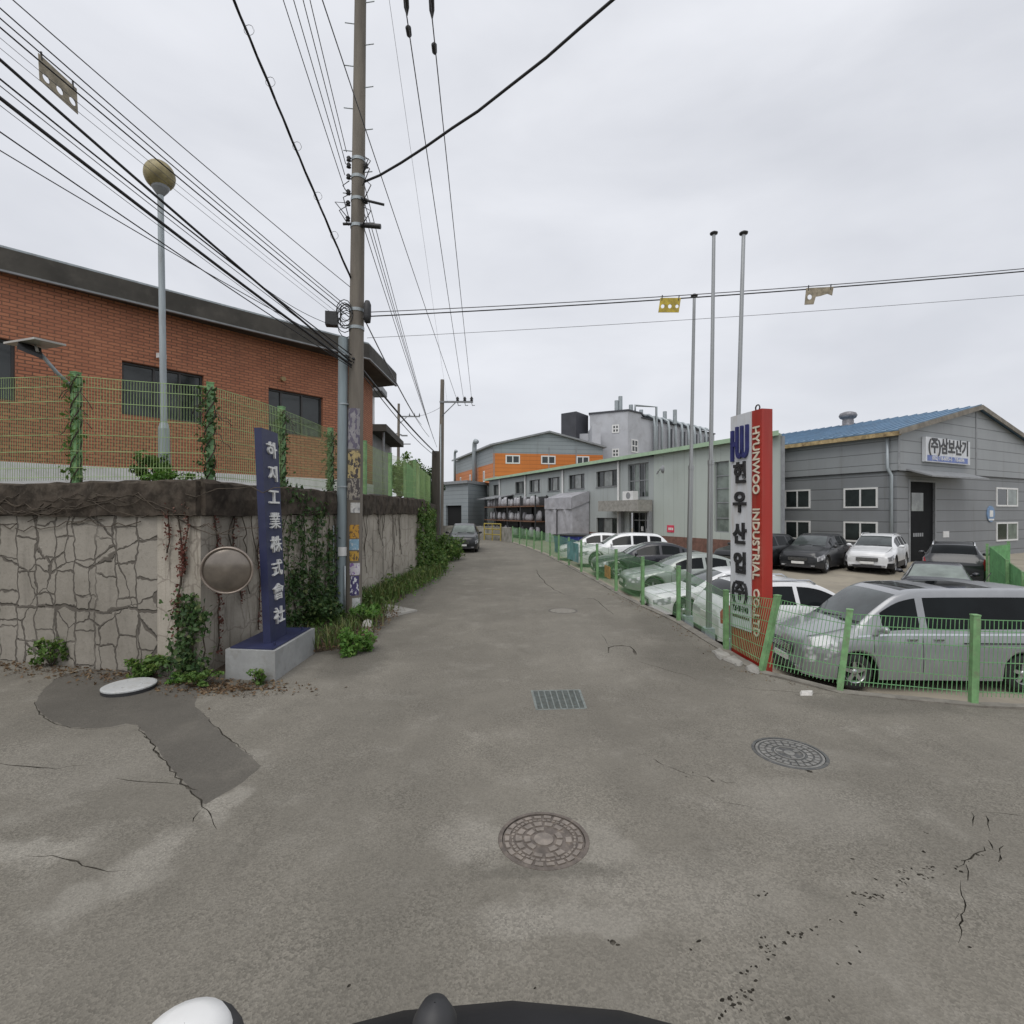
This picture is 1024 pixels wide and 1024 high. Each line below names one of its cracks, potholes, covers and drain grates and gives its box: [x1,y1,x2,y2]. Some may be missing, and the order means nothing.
drain grate [531,689,587,710]
manhole cover [751,737,830,772]
manhole cover [498,812,590,871]
crack [35,855,126,872]
crack [34,702,255,829]
crack [689,812,1020,1021]
